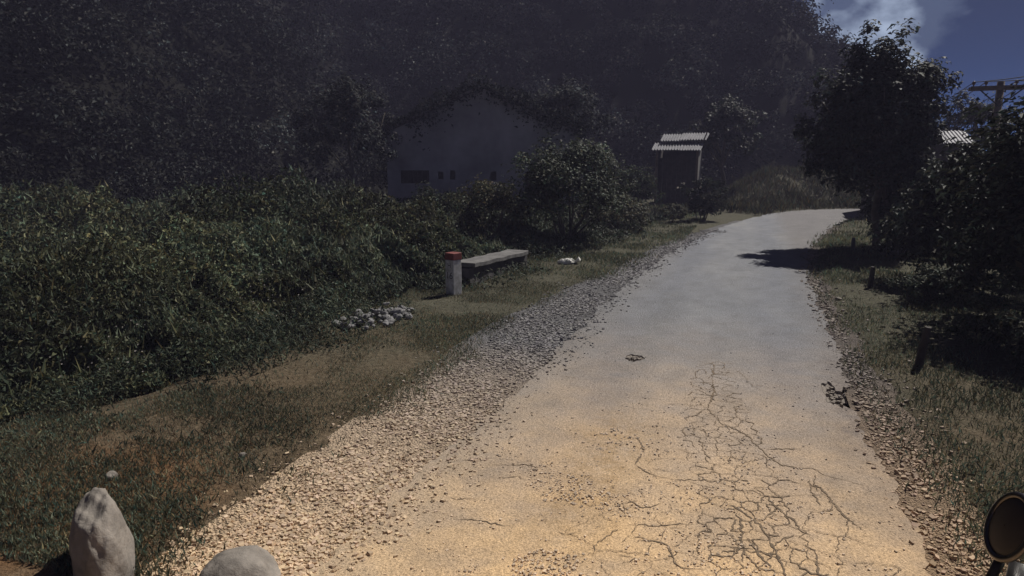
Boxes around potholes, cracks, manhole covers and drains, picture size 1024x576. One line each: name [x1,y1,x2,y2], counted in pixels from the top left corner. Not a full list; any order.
pothole [821,381,847,408]
crack [541,363,901,576]
